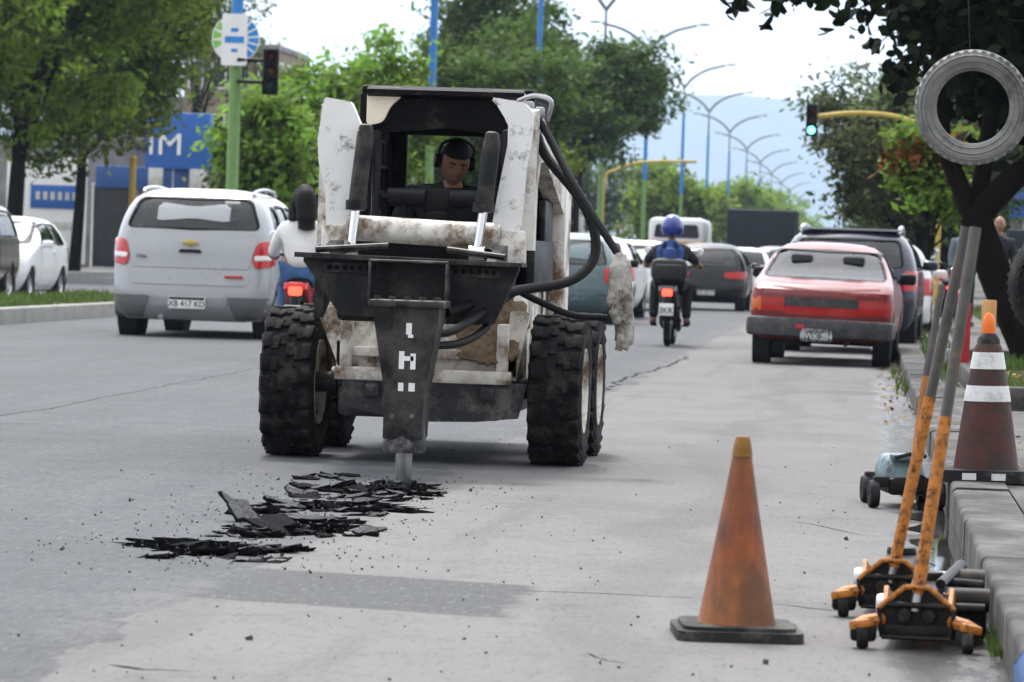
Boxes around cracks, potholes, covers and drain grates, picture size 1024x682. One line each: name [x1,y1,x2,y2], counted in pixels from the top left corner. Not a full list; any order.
crack [1,368,258,416]
crack [605,357,688,390]
